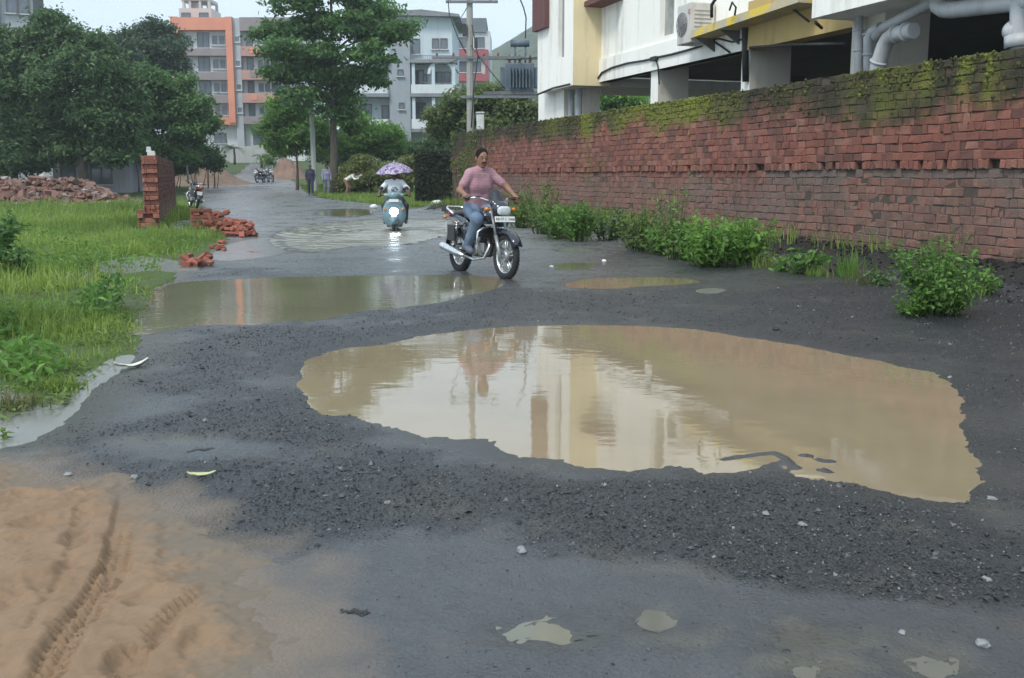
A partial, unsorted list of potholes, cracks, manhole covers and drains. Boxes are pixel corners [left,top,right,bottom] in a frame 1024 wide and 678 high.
pothole [313,208,376,216]
pothole [262,320,1024,516]
pothole [633,609,678,632]
pothole [550,275,715,290]
pothole [129,273,521,336]
pothole [496,614,600,645]
